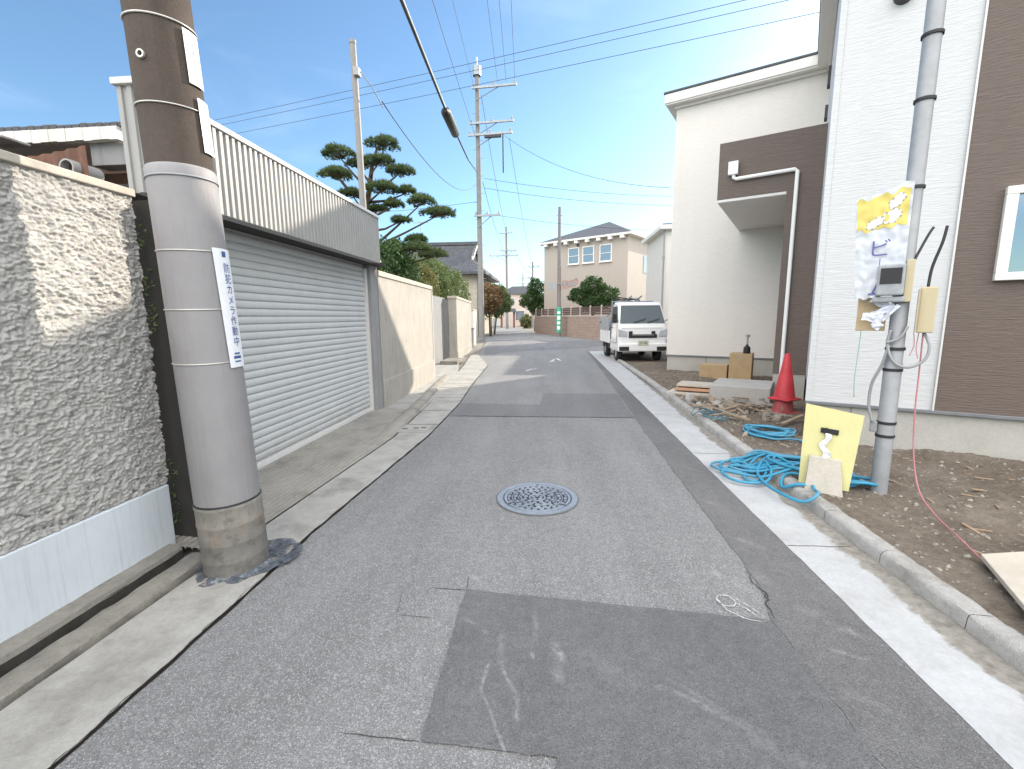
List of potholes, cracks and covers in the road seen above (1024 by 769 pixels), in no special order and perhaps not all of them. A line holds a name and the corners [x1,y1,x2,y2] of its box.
manhole cover [496,482,579,516]
crack [746,569,774,617]
